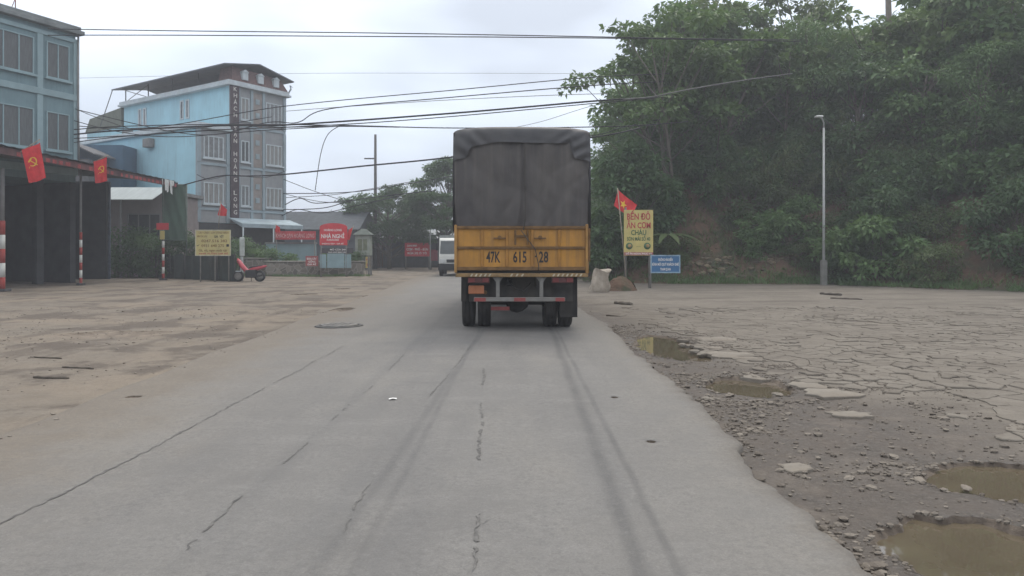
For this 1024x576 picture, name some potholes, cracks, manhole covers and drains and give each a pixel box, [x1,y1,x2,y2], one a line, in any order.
crack [472,368,492,571]
pothole [843,504,1024,576]
pothole [691,375,805,400]
pothole [899,457,1024,509]
pothole [626,334,720,364]
crack [0,346,343,524]
crack [186,356,402,550]
